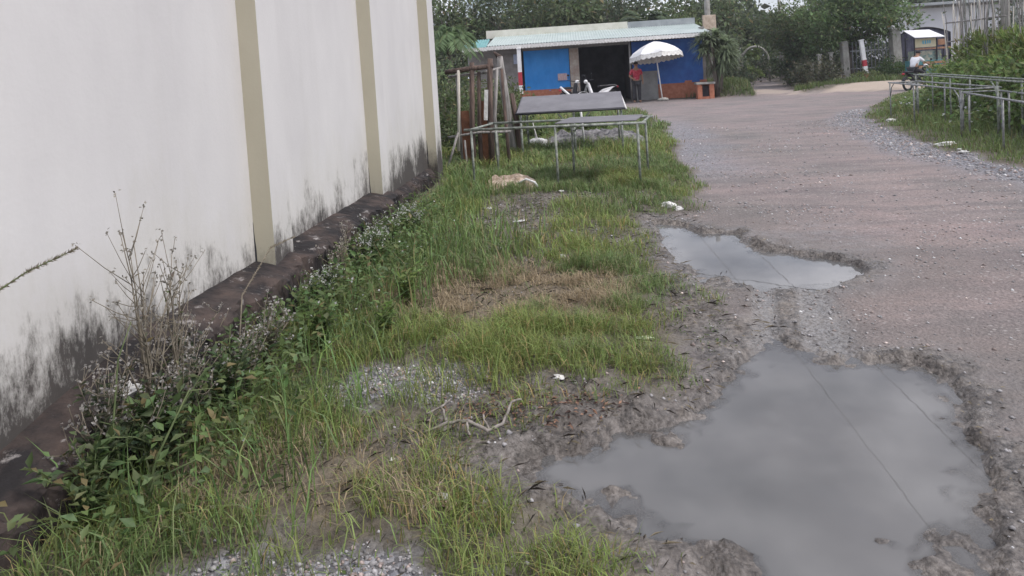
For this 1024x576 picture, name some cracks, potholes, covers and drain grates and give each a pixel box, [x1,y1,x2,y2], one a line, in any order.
pothole [465,332,1024,576]
pothole [650,217,874,293]
